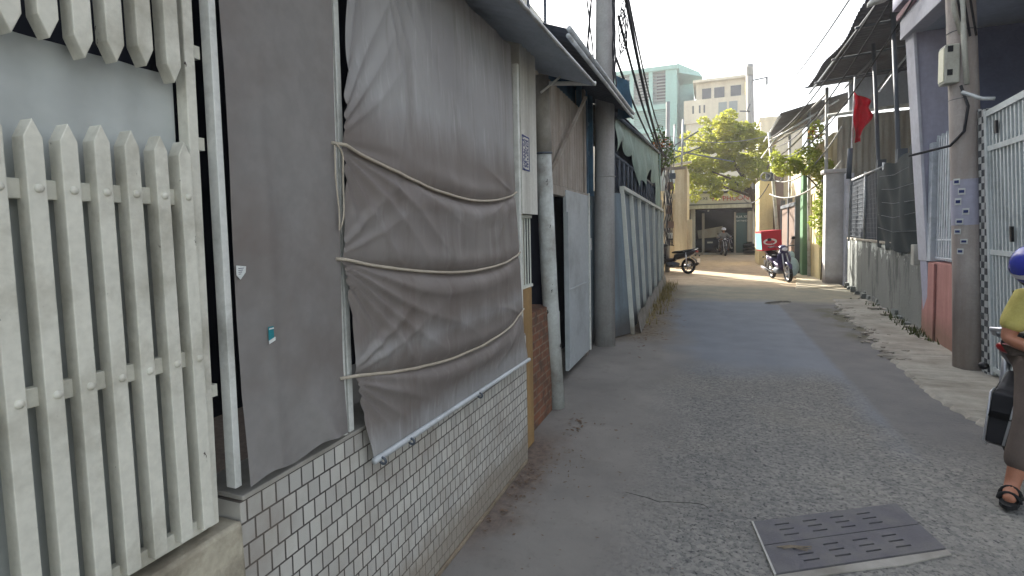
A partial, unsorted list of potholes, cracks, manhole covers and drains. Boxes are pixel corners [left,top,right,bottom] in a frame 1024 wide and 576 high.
crack [626,492,710,511]
